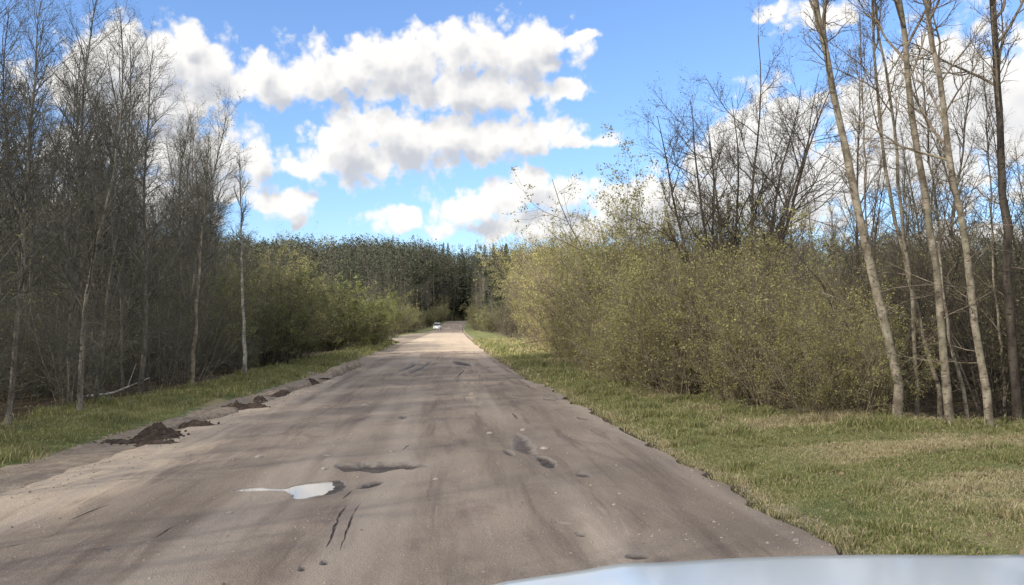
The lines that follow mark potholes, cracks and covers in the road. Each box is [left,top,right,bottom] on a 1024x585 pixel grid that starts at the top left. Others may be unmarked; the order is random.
pothole [535,456,559,468]
pothole [356,481,384,489]
pothole [334,461,431,473]
pothole [232,480,349,497]
pothole [512,434,538,455]
crack [326,491,361,550]
